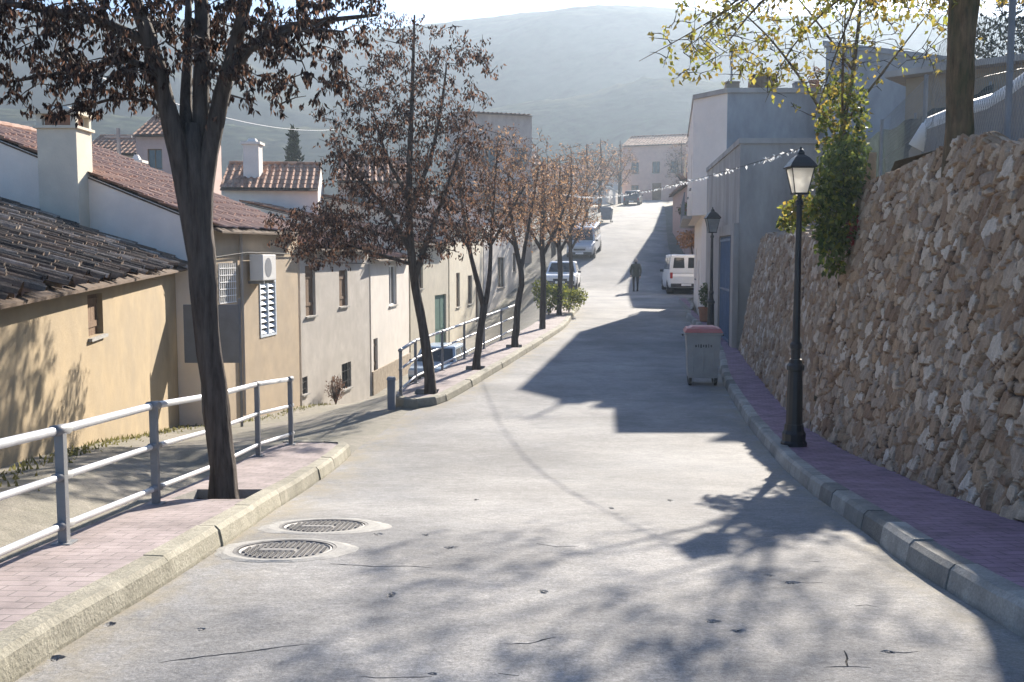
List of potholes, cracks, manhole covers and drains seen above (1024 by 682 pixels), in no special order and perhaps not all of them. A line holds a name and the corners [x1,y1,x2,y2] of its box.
crack [831,650,869,668]
crack [160,644,305,663]
